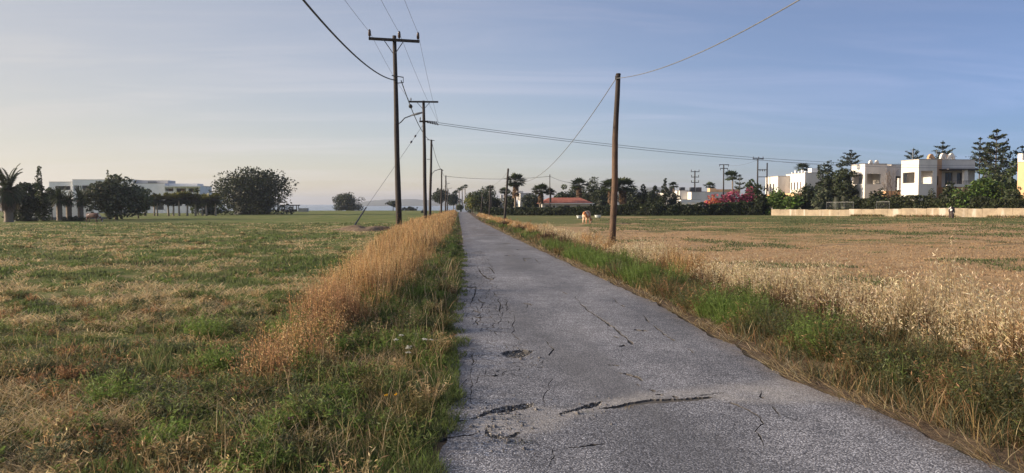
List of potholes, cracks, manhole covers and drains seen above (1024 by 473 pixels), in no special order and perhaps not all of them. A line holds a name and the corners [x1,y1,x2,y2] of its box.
crack [438,243,554,442]
crack [602,364,781,448]
pothole [485,427,520,439]
crack [563,292,694,353]
pothole [501,349,535,359]
